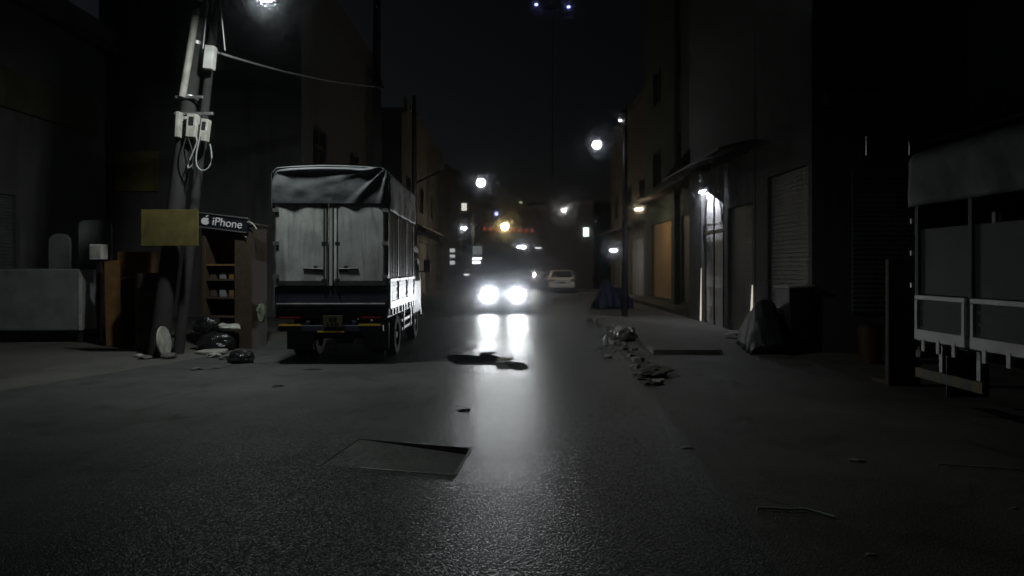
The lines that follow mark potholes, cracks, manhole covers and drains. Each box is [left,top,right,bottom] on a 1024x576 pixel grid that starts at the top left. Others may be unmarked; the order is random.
pothole [508,362,529,371]
pothole [445,355,502,365]
manhole cover [322,439,471,475]
